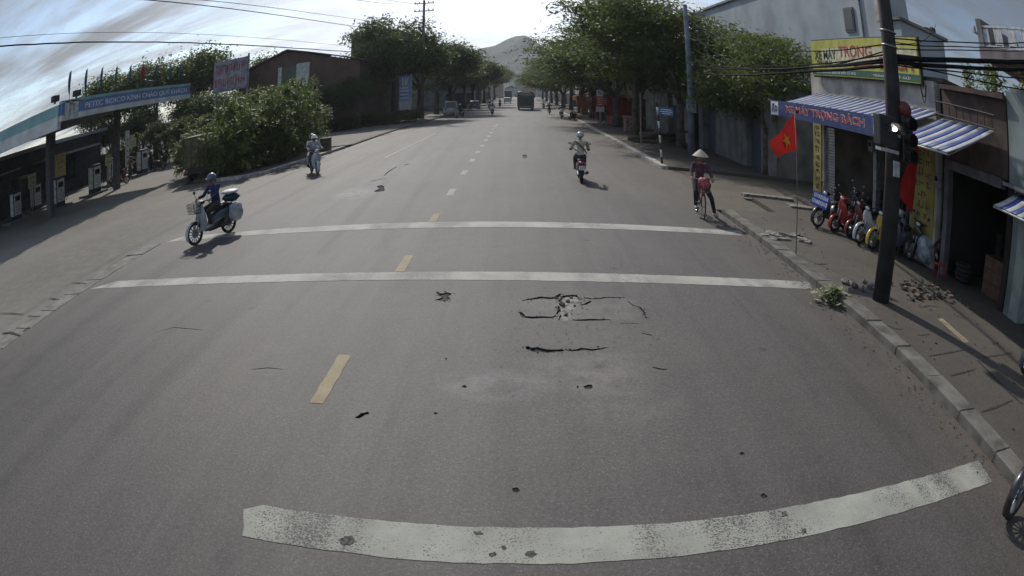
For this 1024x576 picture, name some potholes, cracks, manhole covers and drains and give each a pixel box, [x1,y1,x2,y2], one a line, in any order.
pothole [558,295,580,320]
crack [520,294,652,336]
